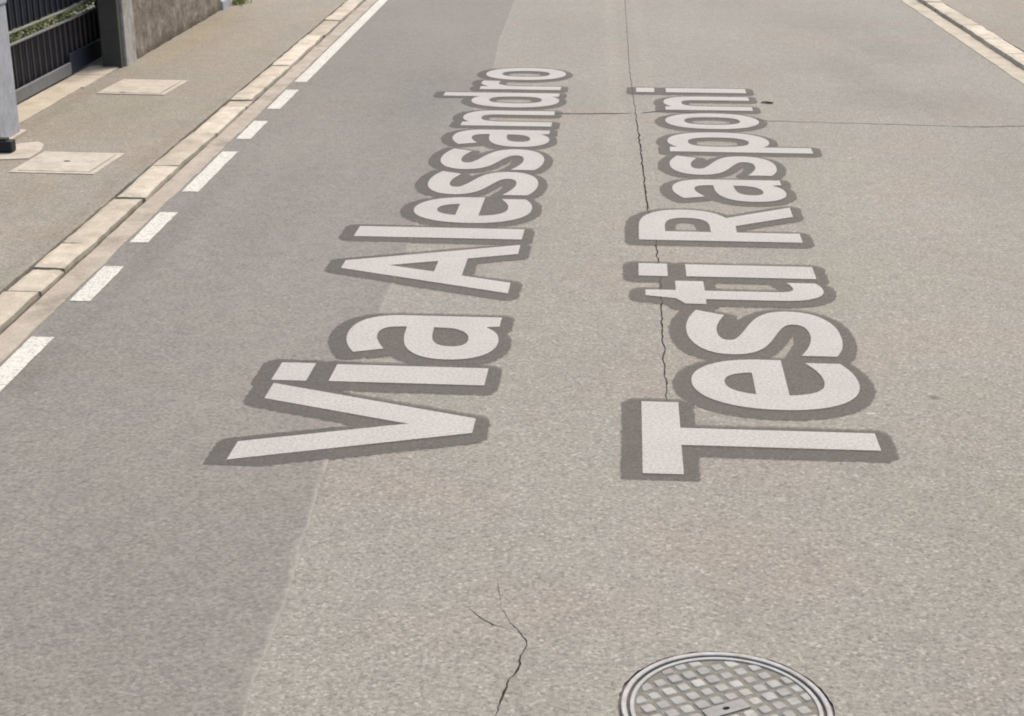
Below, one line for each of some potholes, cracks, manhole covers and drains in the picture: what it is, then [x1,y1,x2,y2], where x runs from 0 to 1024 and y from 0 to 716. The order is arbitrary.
crack [466,587,527,716]
manhole cover [618,652,835,716]
manhole cover [96,79,188,95]
manhole cover [8,151,125,175]
